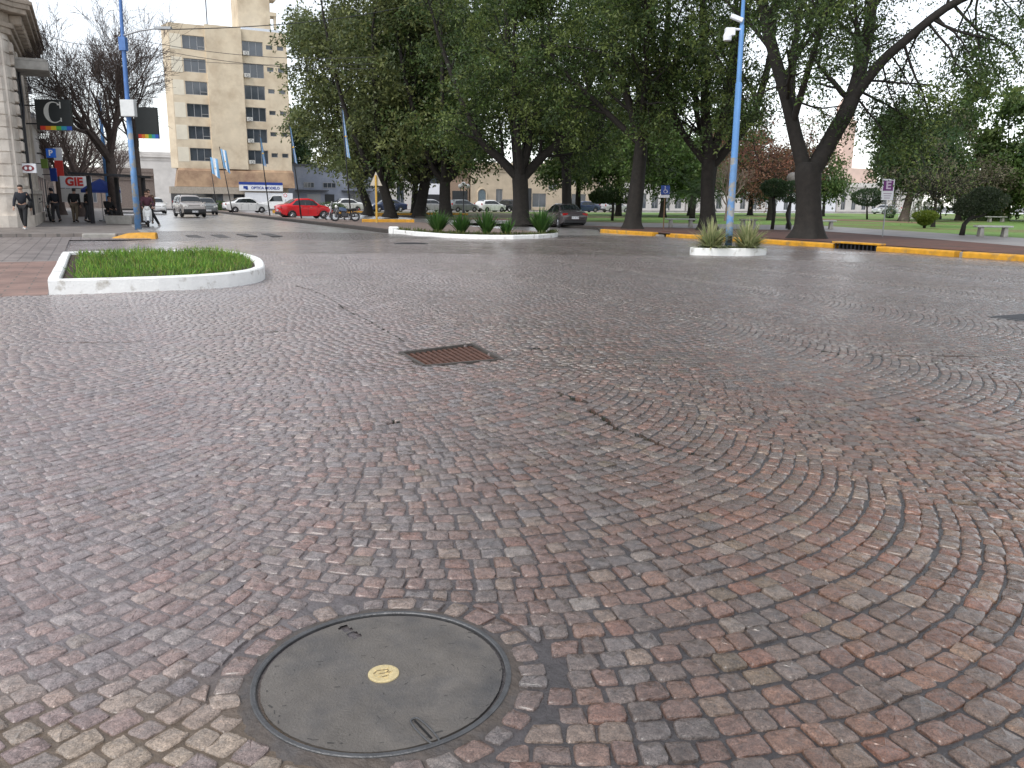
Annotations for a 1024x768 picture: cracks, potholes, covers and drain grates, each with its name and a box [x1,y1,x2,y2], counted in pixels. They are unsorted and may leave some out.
manhole cover [237,607,527,768]
drain grate [832,241,886,251]
drain grate [398,343,504,366]
crack [543,391,619,404]
